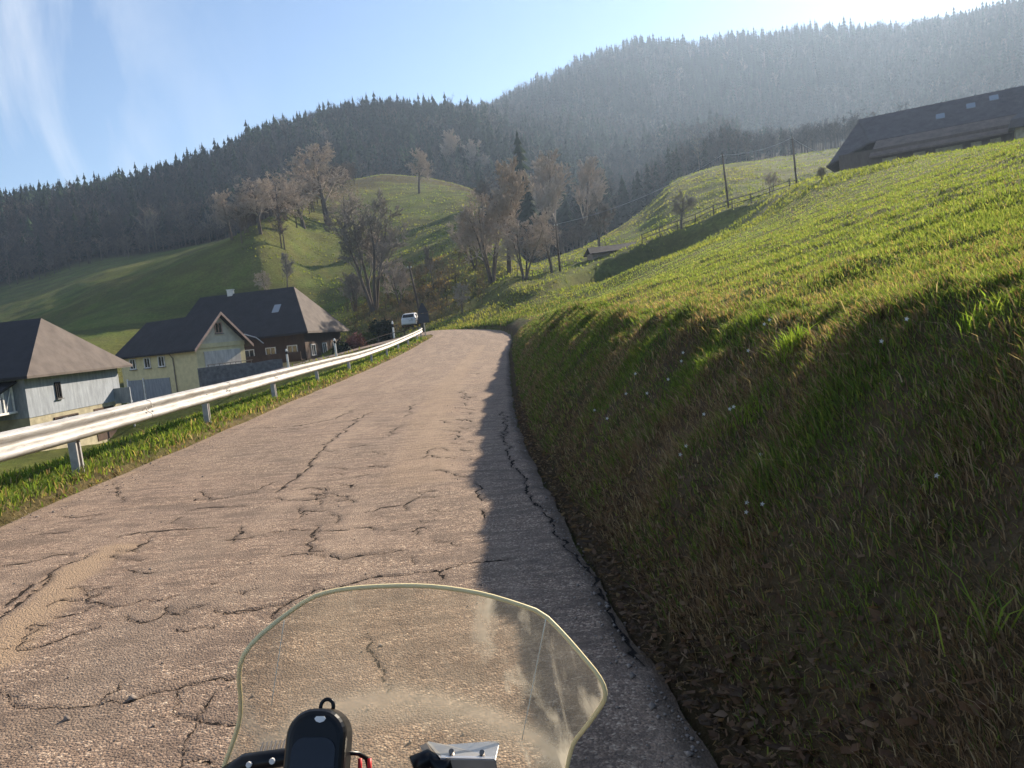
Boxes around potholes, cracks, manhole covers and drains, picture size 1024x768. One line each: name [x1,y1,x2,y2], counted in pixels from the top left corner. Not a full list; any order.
crack [367,639,392,693]
crack [0,446,507,651]
crack [7,677,236,768]
crack [499,413,645,666]
crack [423,373,485,518]
